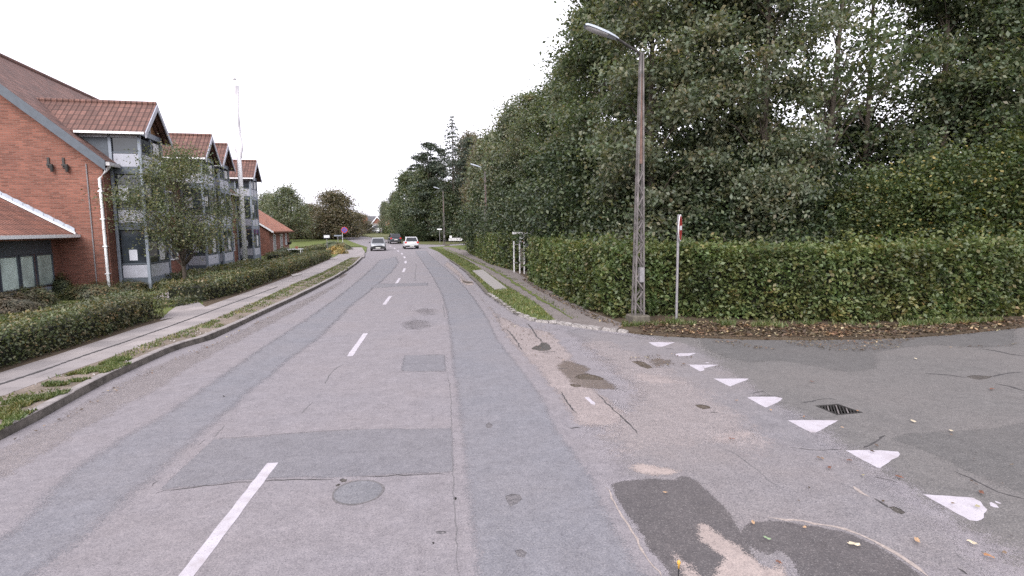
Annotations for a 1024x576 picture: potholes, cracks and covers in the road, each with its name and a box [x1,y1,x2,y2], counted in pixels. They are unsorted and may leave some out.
drain grate [816,404,863,415]
crack [596,388,637,433]
crack [491,308,563,369]
manhole cover [332,480,385,505]
